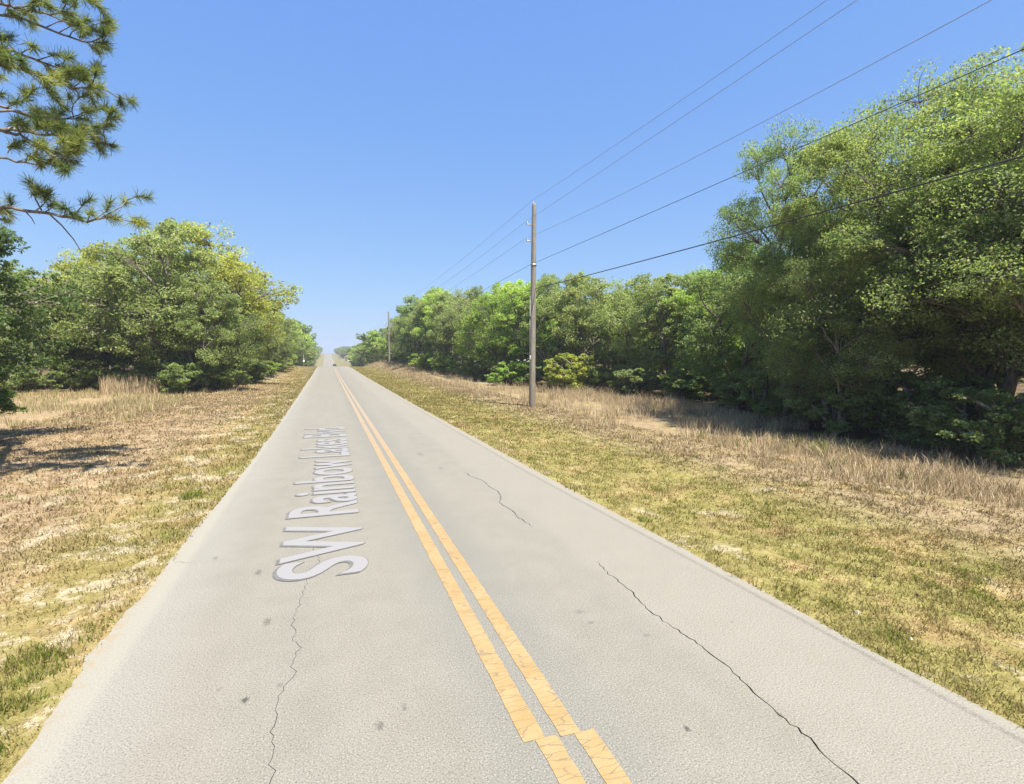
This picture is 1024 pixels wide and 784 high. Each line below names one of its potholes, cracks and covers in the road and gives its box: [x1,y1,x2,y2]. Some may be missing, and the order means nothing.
crack [268,539,320,784]
crack [599,564,859,784]
